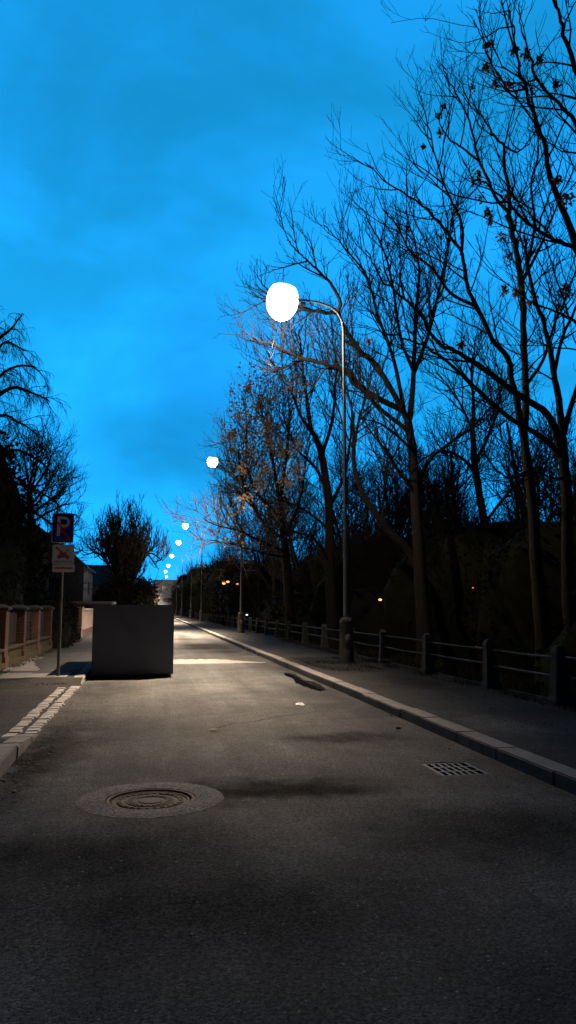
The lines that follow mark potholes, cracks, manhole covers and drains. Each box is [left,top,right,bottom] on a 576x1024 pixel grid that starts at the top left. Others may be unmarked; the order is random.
manhole cover [75,782,224,818]
drain grate [422,762,490,776]
